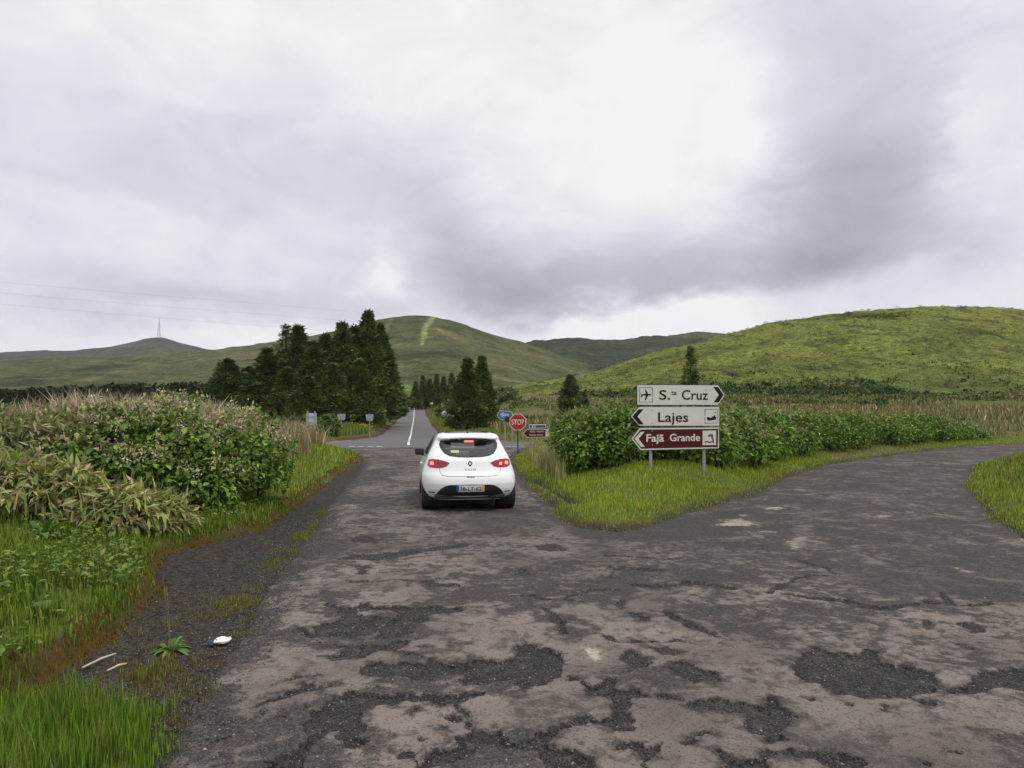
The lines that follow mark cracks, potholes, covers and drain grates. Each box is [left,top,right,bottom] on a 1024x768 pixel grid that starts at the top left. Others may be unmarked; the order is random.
crack [763,559,997,611]
pothole [323,640,411,661]
pothole [687,694,799,744]
pothole [358,643,650,768]
pothole [294,602,467,639]
pothole [679,730,712,746]
pothole [792,645,942,700]
